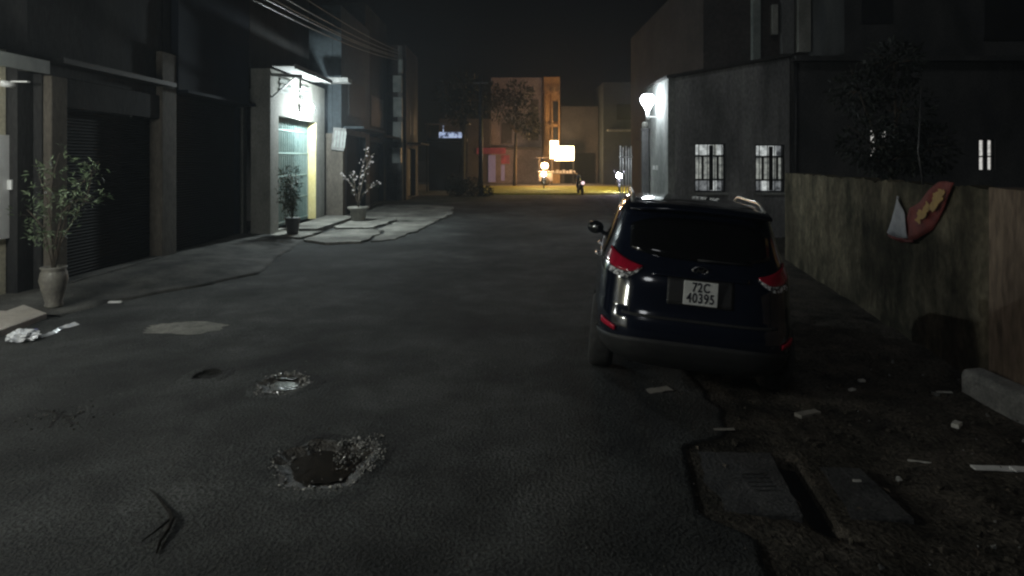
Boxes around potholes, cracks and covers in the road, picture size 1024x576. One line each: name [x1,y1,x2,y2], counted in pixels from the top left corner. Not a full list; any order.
pothole [244,369,326,398]
pothole [176,365,237,384]
crack [2,405,124,433]
pothole [254,432,395,503]
